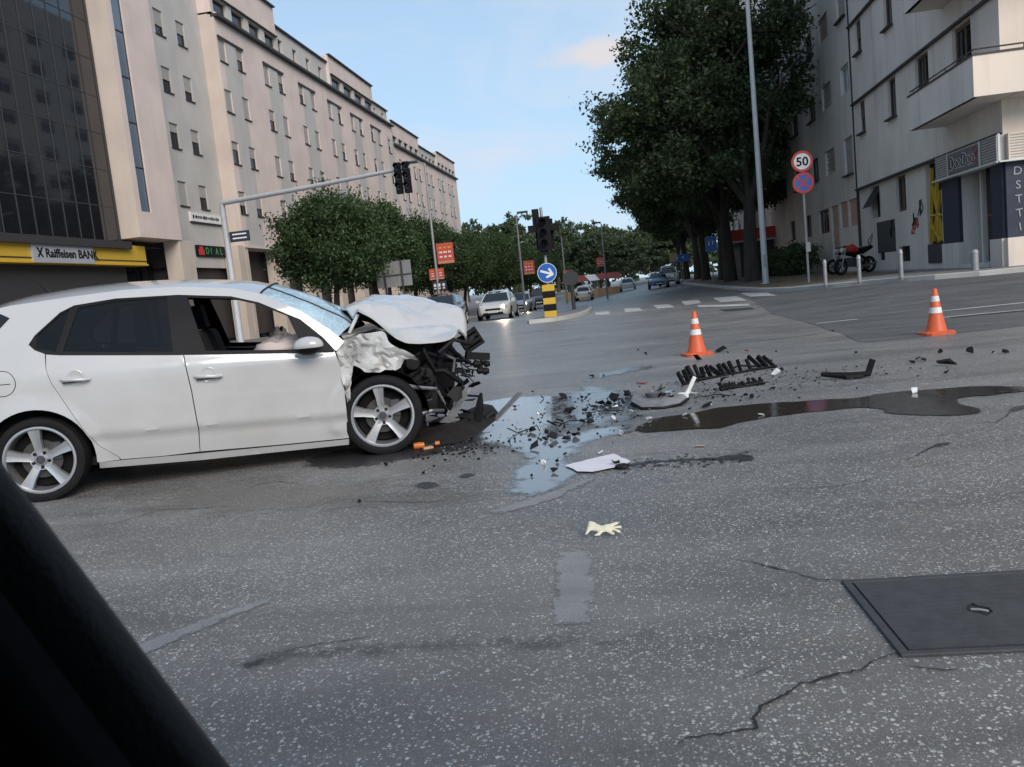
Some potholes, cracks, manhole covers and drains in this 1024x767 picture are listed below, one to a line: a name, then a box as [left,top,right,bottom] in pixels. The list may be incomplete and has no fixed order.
crack [739,559,835,580]
manhole cover [842,570,1024,658]
crack [678,653,959,743]
